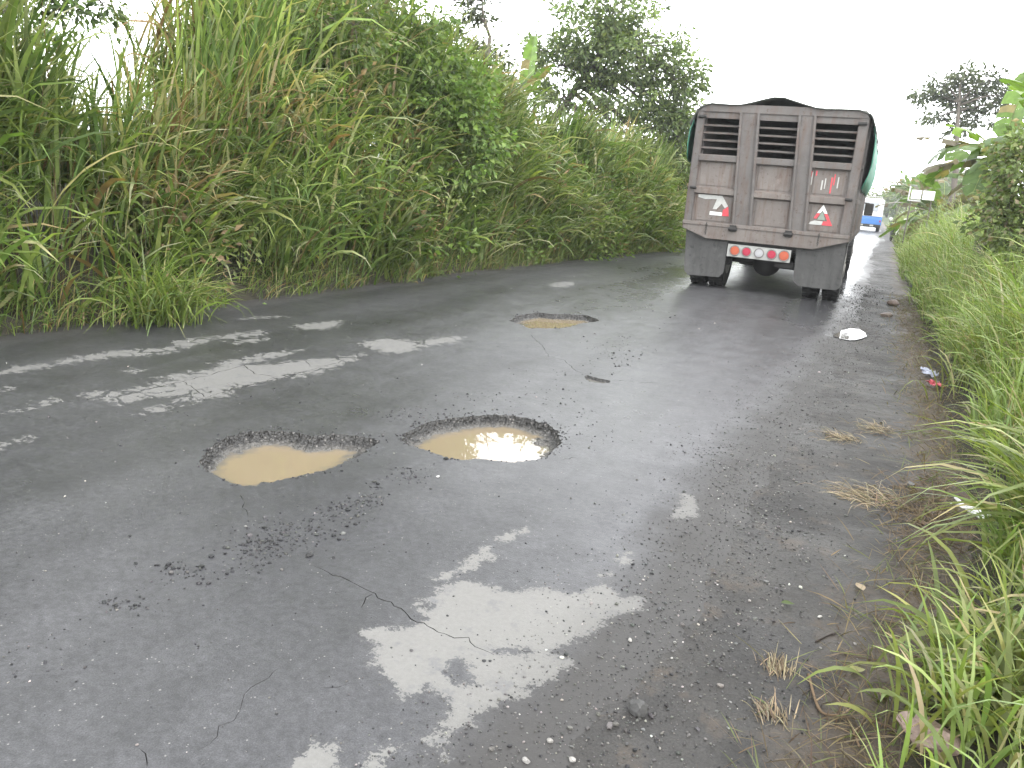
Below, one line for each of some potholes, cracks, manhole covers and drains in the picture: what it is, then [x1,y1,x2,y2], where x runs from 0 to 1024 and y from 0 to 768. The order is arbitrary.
pothole [199,430,380,486]
crack [311,565,533,653]
pothole [402,414,562,463]
pothole [508,312,599,329]
